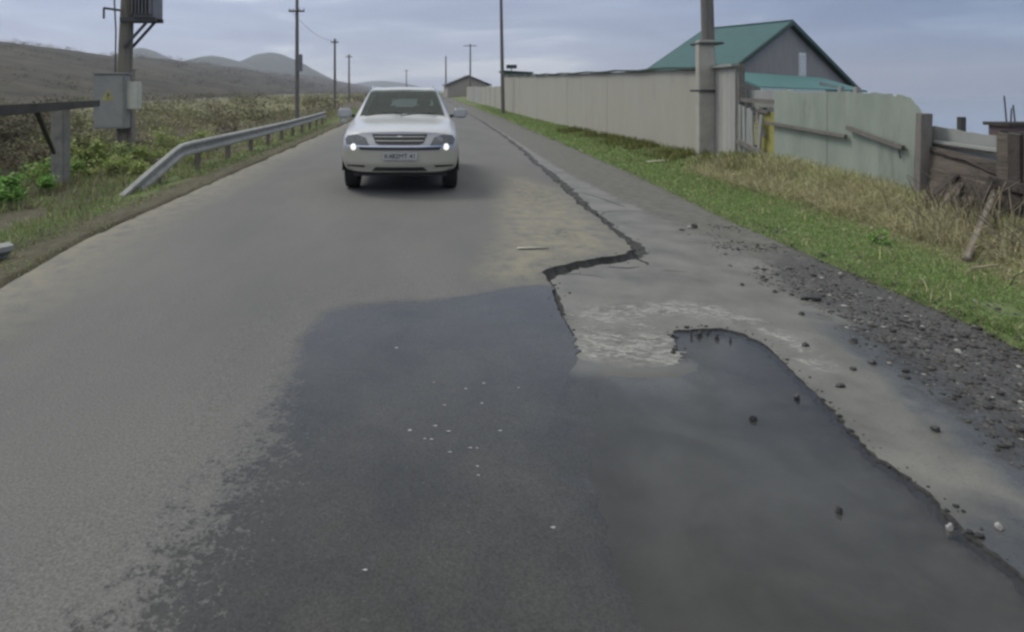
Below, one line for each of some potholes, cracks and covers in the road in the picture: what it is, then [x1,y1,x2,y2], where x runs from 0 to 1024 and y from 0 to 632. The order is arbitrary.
crack [451,103,683,336]
